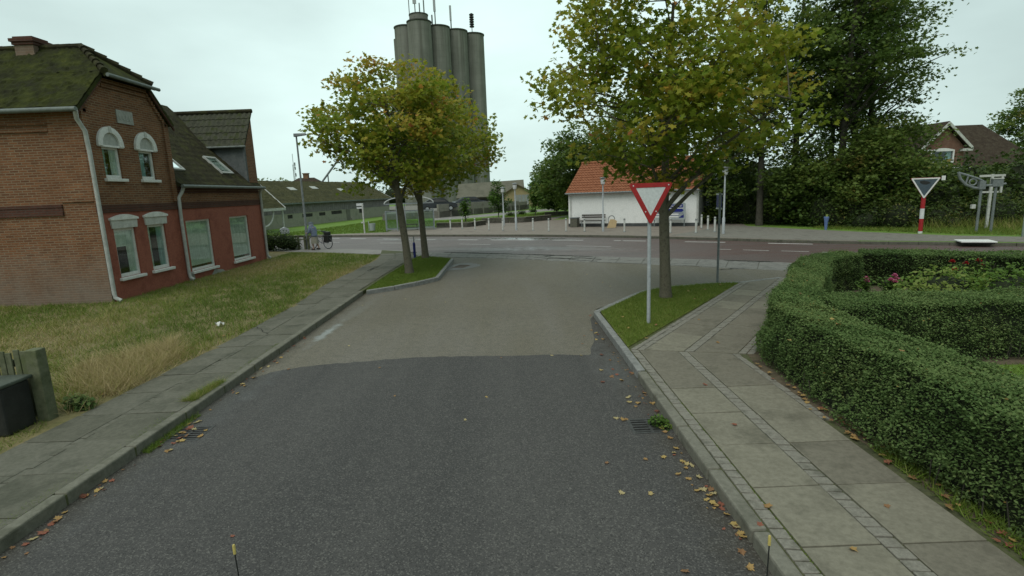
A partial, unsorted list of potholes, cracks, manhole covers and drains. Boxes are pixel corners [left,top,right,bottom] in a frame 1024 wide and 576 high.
manhole cover [447,263,480,271]
drain grate [165,425,216,442]
drain grate [626,418,674,434]
